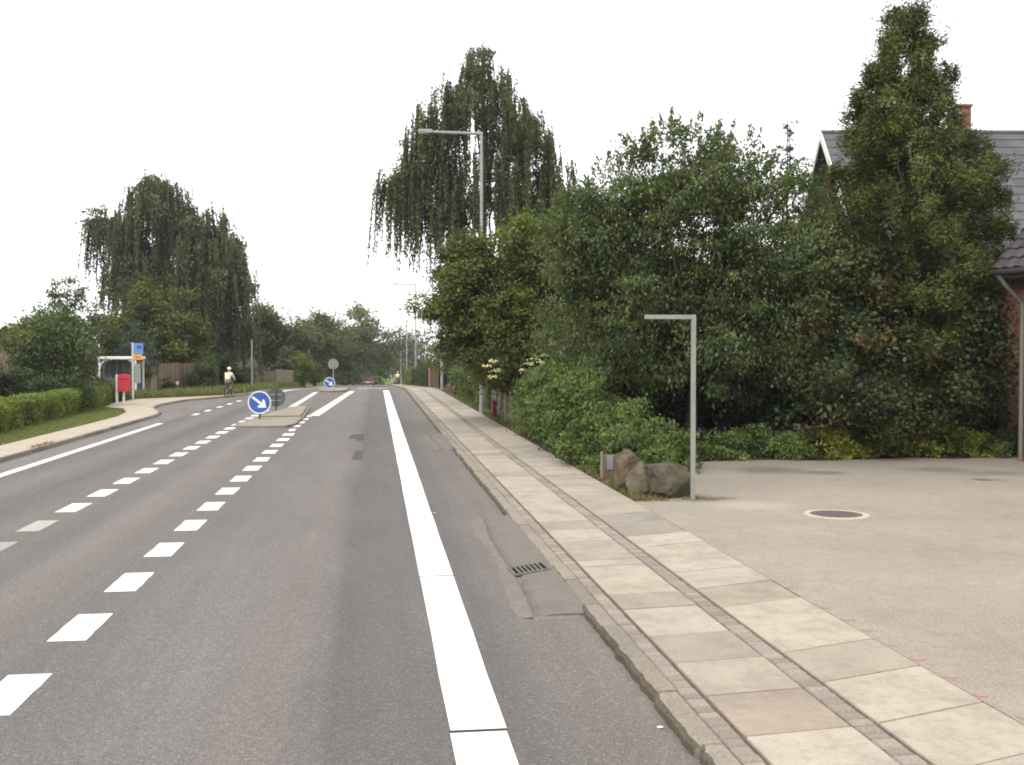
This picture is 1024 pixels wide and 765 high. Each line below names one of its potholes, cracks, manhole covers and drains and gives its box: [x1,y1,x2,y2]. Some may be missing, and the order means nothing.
drain grate [507,561,551,576]
manhole cover [803,509,871,520]
